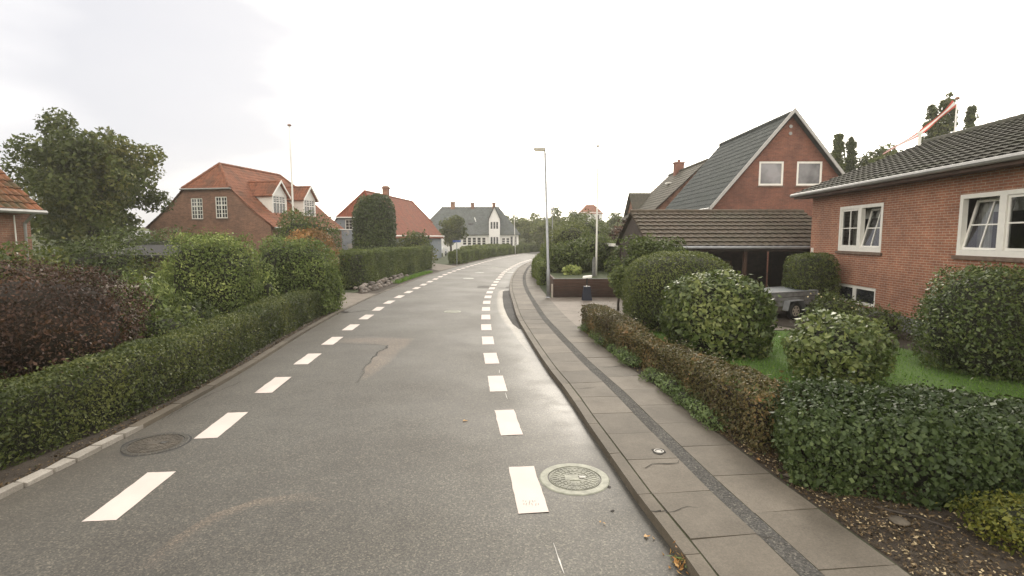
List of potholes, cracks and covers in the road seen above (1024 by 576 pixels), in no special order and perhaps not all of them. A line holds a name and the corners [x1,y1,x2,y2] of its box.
manhole cover [120,433,190,456]
manhole cover [539,463,610,496]
